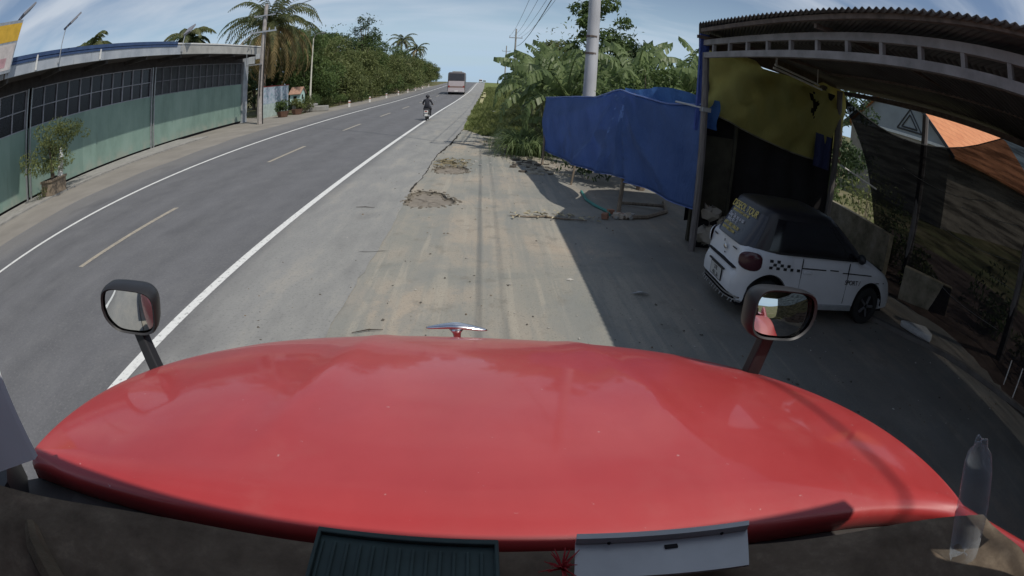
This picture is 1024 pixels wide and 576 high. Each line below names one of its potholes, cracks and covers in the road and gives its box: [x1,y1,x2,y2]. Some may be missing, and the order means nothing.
pothole [402,189,462,209]
crack [410,130,462,191]
pothole [432,157,472,174]
